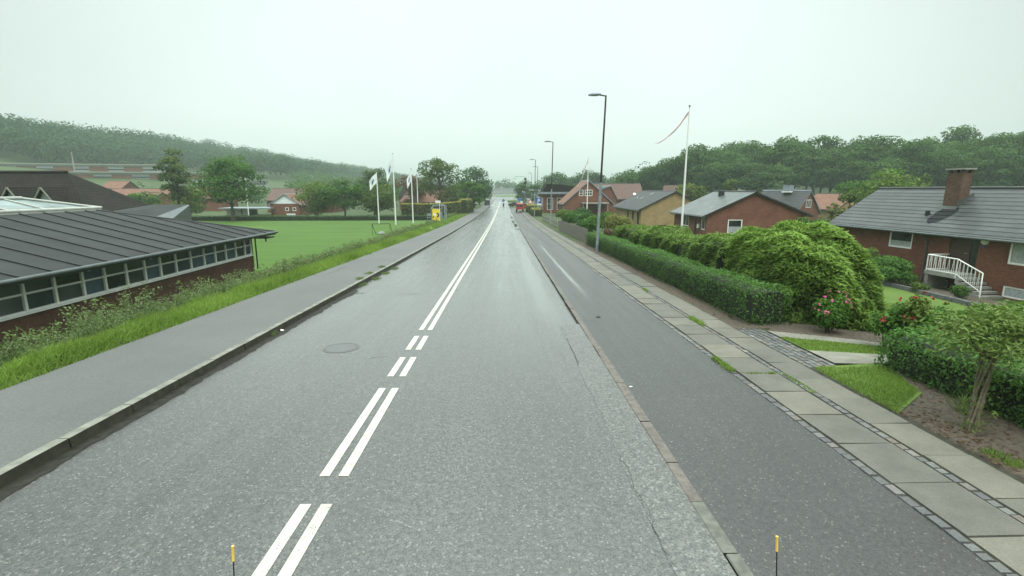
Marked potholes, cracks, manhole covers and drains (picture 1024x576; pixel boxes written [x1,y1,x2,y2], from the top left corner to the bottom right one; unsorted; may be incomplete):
manhole cover [322,343,360,353]
